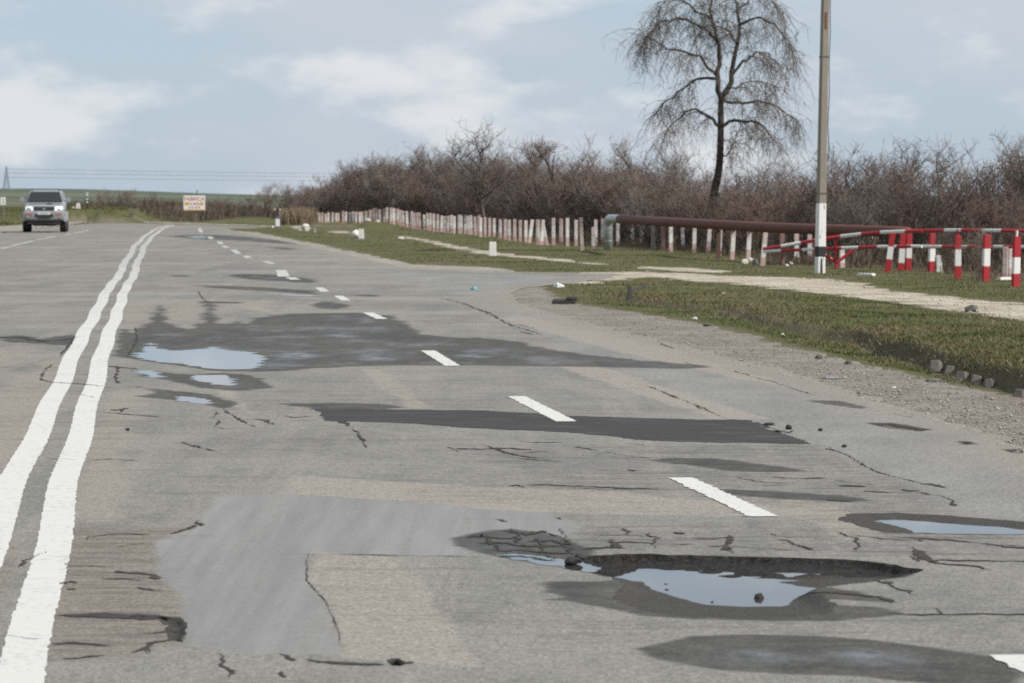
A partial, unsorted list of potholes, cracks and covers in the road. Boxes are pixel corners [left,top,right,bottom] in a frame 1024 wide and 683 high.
crack [468,517,817,561]
crack [447,299,542,335]
pothole [838,513,1024,535]
crack [738,445,957,506]
pothole [583,554,923,618]
crack [11,612,182,653]
